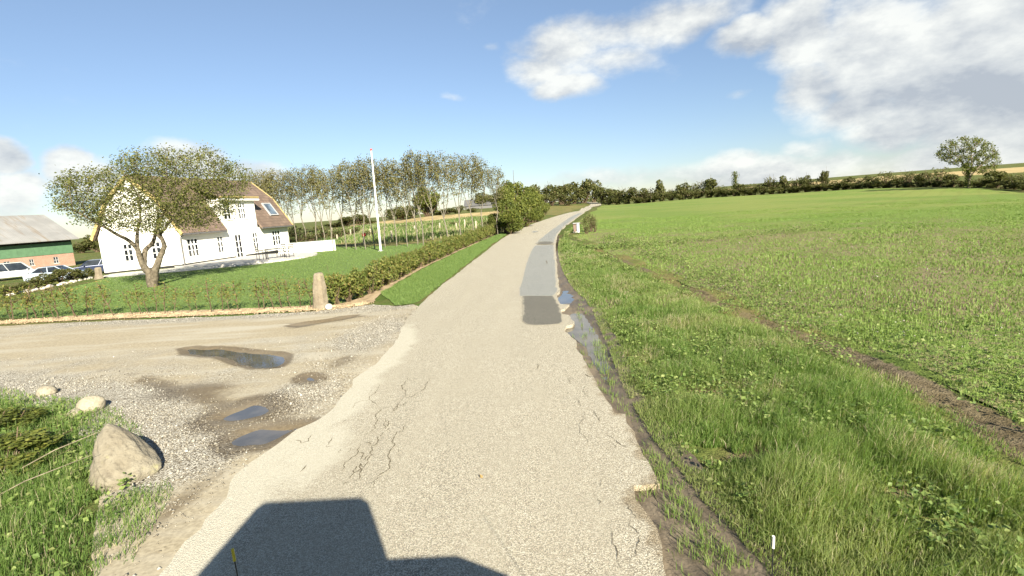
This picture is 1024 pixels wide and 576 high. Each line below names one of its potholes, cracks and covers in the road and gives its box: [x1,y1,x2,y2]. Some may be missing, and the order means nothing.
crack [298,377,428,485]
pothole [293,372,327,384]
pothole [214,419,318,453]
pothole [202,398,285,427]
crack [611,501,640,568]
pothole [174,345,298,370]
